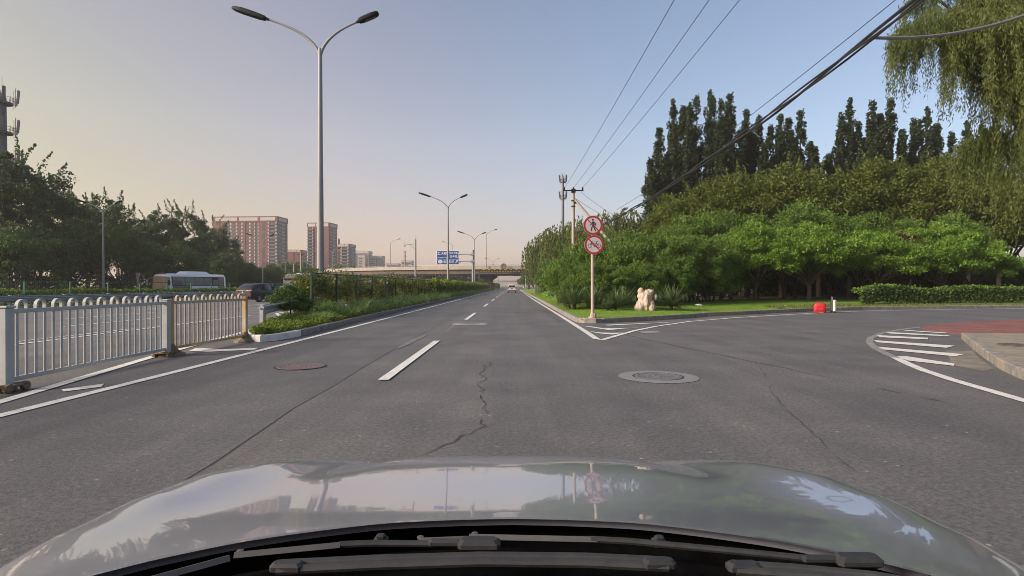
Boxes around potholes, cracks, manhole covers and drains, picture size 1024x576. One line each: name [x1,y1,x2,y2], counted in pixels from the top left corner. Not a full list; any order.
crack [415,362,491,458]
manhole cover [618,371,699,383]
crack [628,335,857,472]
